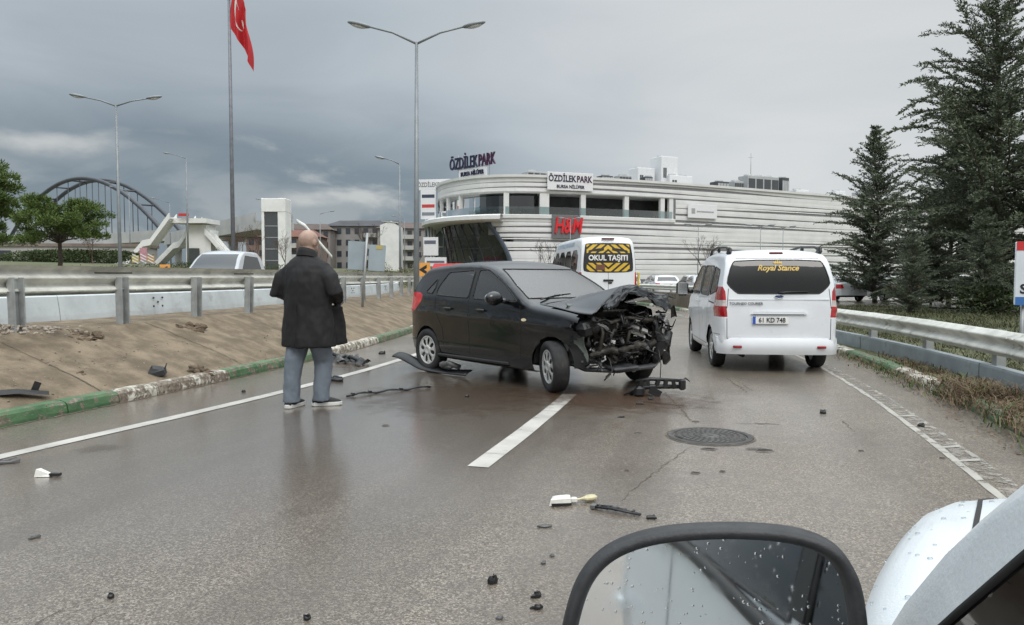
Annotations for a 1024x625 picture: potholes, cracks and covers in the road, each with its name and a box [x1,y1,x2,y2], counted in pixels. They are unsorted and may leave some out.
manhole cover [667,427,754,445]
crack [624,392,770,499]
